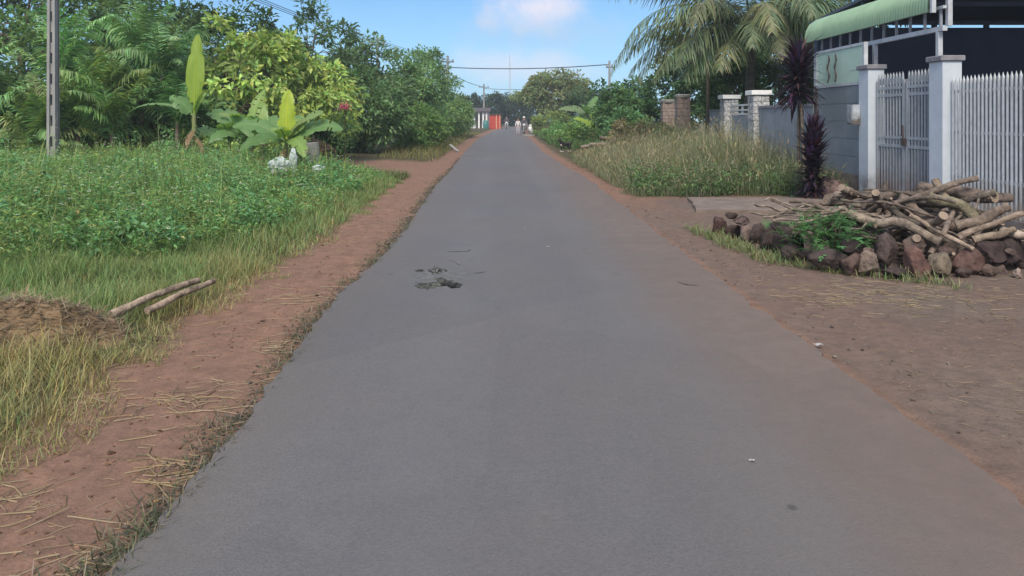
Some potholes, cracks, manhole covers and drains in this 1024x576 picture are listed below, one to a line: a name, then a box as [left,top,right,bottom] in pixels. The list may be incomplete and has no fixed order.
pothole [414,277,462,290]
